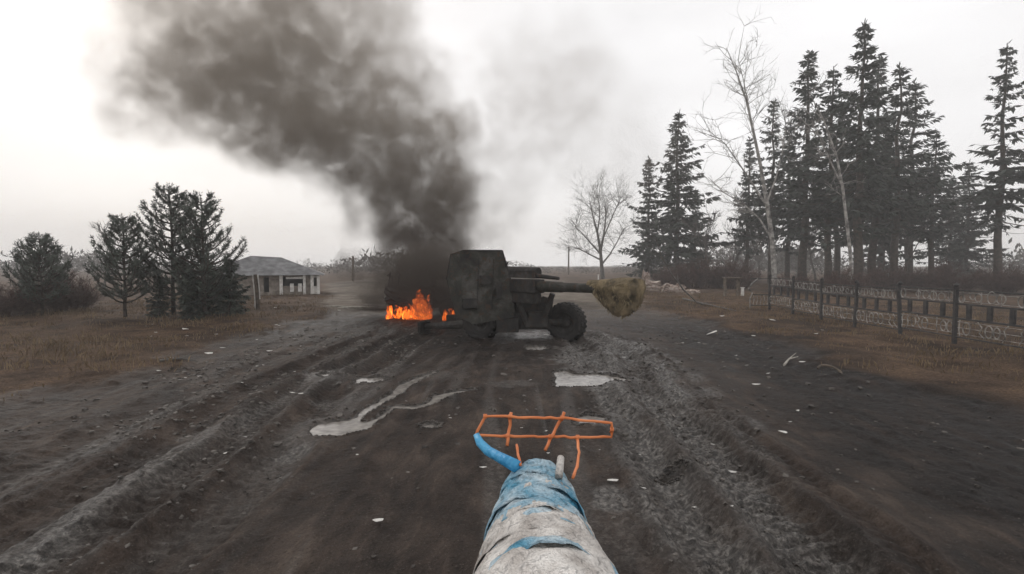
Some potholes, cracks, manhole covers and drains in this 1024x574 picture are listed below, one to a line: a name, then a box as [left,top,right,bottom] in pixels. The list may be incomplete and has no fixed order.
pothole [654,458,690,486]
